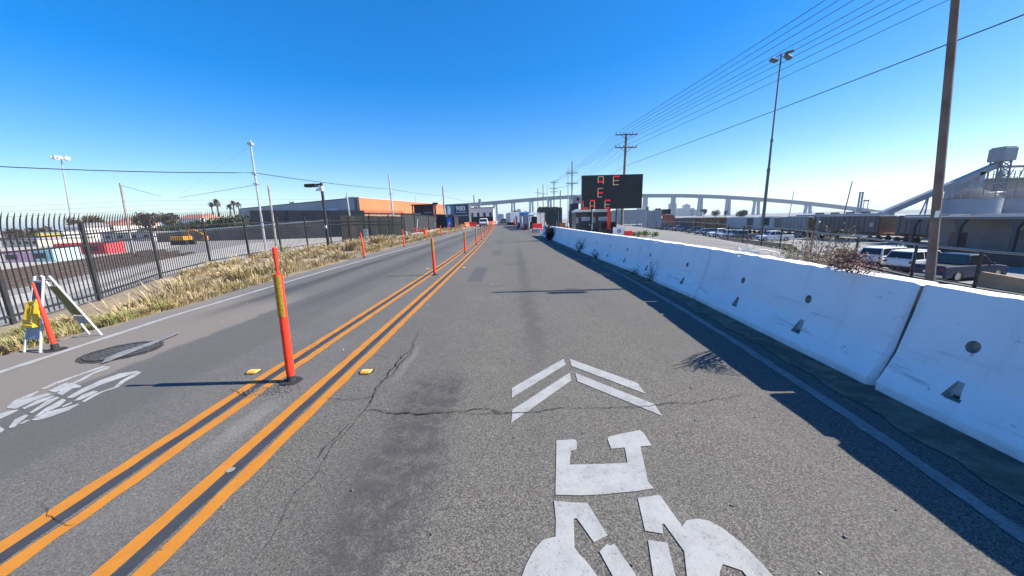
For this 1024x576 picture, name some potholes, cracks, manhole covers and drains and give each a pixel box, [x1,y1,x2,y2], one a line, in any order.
manhole cover [76,341,164,363]
crack [256,338,738,558]
